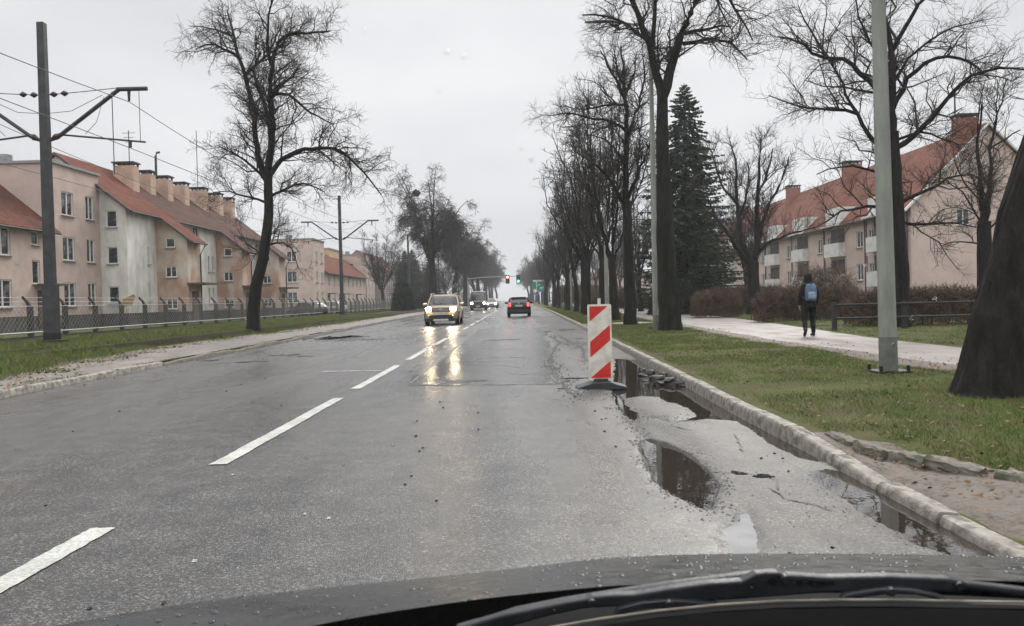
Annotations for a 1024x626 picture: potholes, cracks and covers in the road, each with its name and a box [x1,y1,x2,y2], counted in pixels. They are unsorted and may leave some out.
pothole [639,439,720,509]
crack [715,471,835,511]
